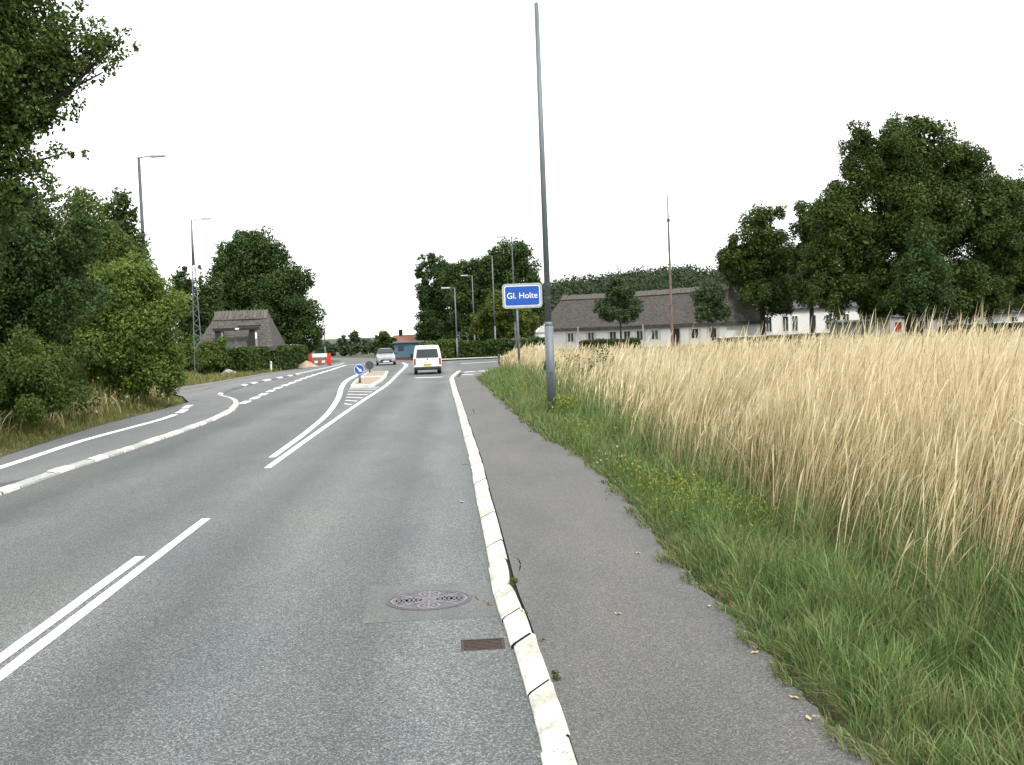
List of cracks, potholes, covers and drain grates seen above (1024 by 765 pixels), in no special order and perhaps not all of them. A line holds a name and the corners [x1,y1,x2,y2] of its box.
drain grate [461,638,506,651]
manhole cover [387,590,471,611]
